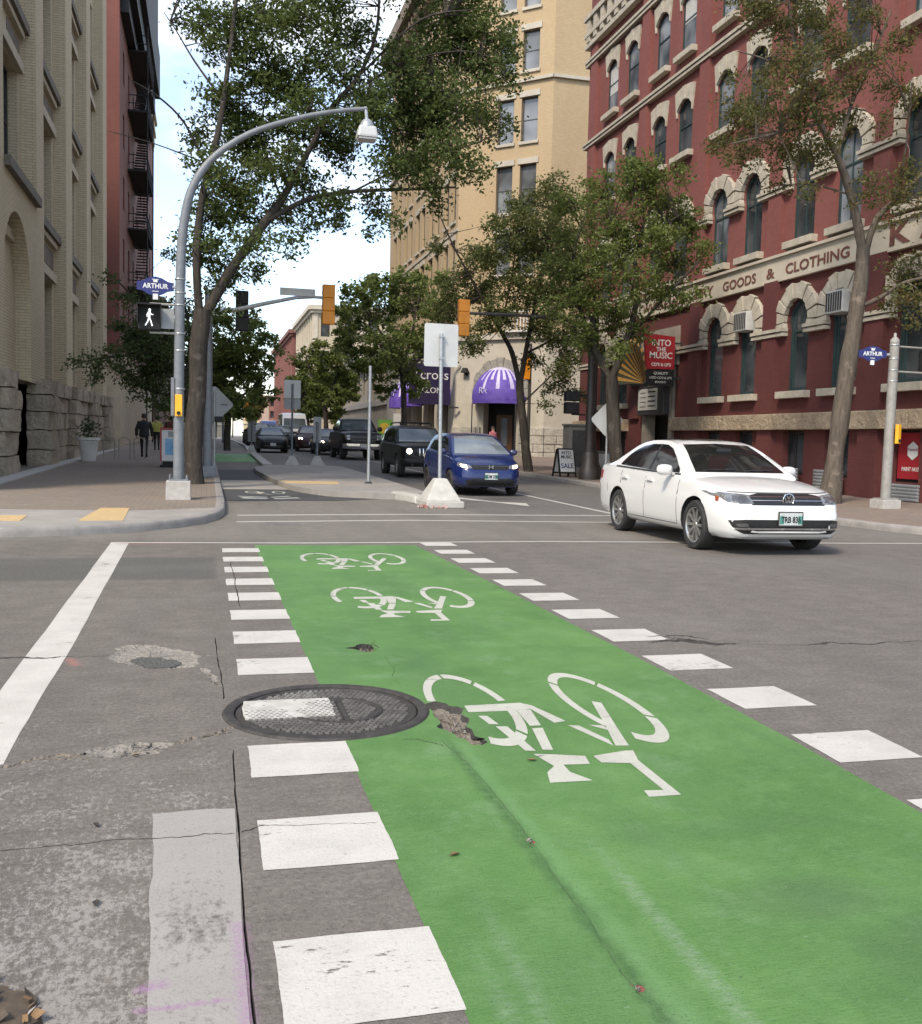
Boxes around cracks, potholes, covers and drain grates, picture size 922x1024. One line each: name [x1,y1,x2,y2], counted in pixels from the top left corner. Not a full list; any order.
crack [648,635,737,646]
manhole cover [222,684,429,742]
crack [0,834,203,851]
crack [0,727,234,768]
pothole [426,702,487,745]
pothole [348,644,379,652]
